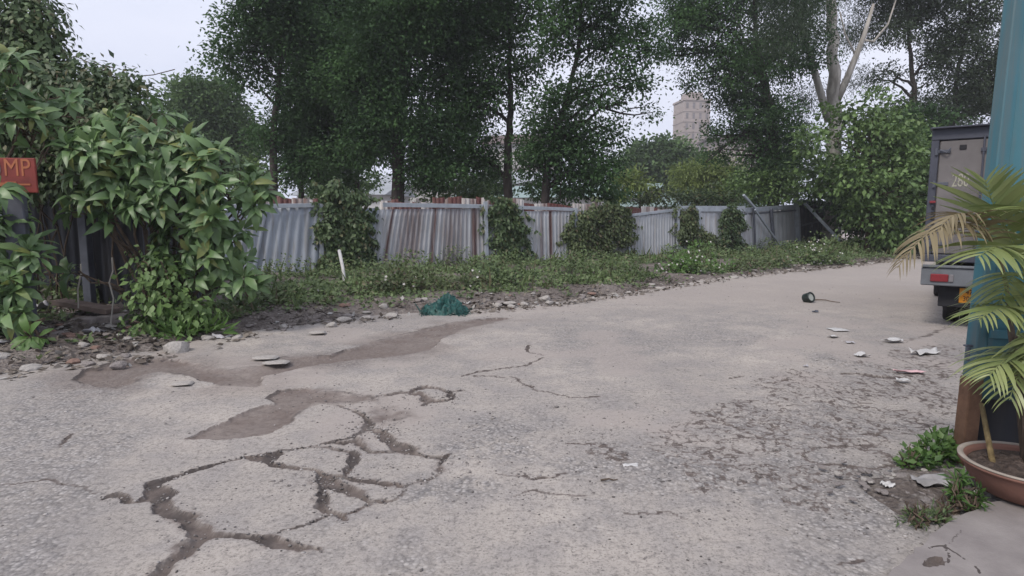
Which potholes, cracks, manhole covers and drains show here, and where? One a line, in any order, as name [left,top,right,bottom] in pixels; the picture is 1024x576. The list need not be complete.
crack [567,357,954,516]
crack [33,345,590,576]
crack [928,530,981,574]
